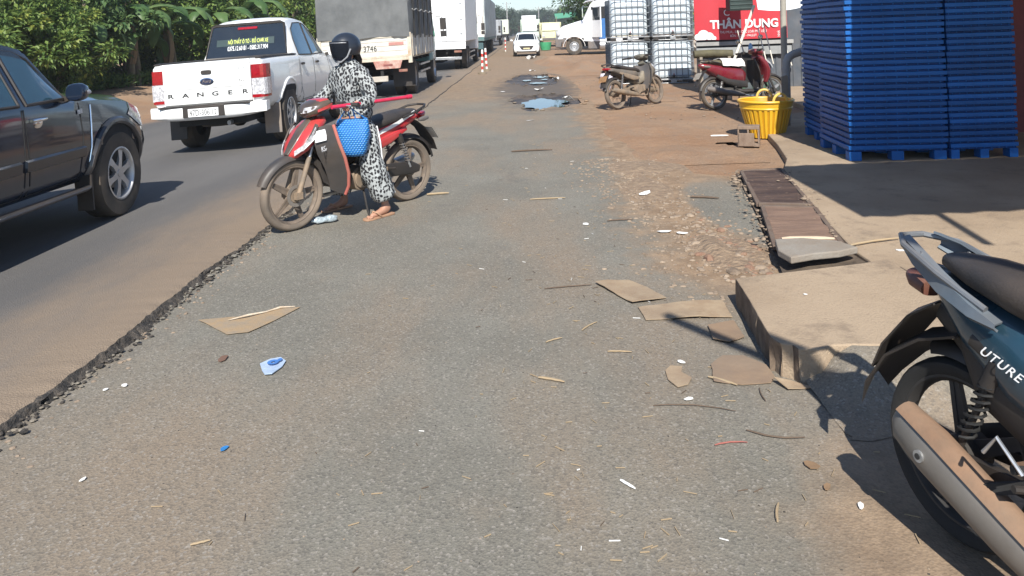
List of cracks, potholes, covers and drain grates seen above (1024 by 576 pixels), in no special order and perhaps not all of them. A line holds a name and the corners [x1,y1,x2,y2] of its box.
pothole [505,73,560,87]
pothole [507,92,589,112]
